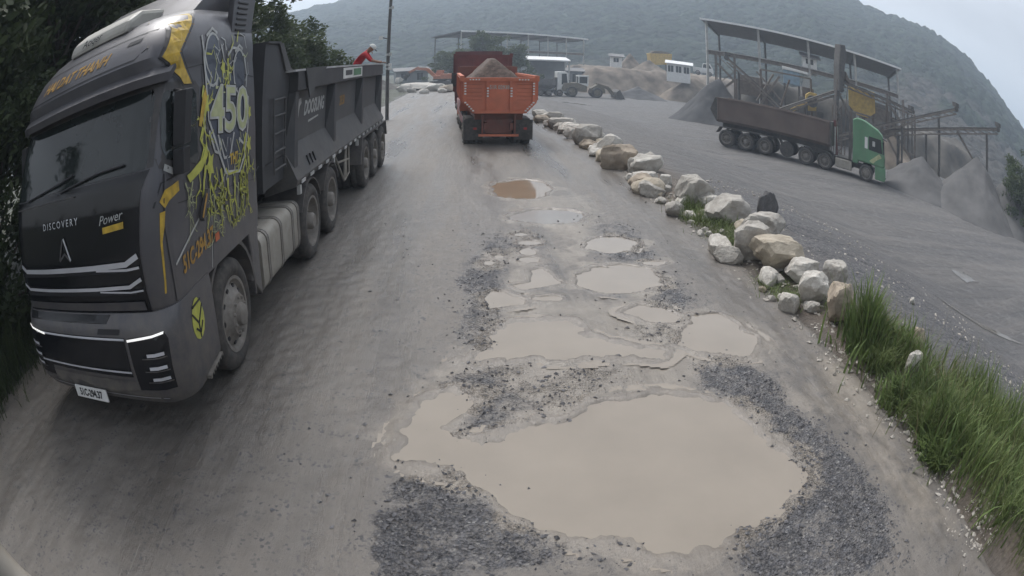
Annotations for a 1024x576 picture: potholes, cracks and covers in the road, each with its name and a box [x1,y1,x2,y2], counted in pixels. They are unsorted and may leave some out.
pothole [506,266,566,294]
pothole [675,312,771,364]
pothole [607,303,685,330]
pothole [483,289,536,313]
pothole [573,262,665,299]
pothole [490,178,556,199]
pothole [581,236,645,255]
pothole [506,207,589,224]
pothole [442,314,687,369]
pothole [372,383,810,574]
